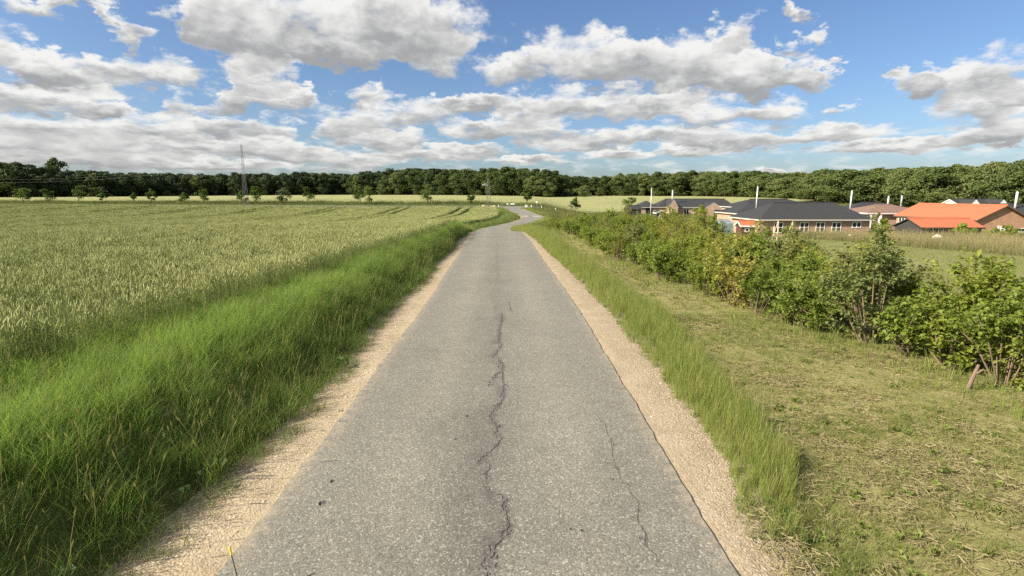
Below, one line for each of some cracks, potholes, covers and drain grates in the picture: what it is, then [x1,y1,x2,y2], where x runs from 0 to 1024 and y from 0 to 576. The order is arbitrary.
crack [478,302,513,576]
crack [599,418,660,563]
